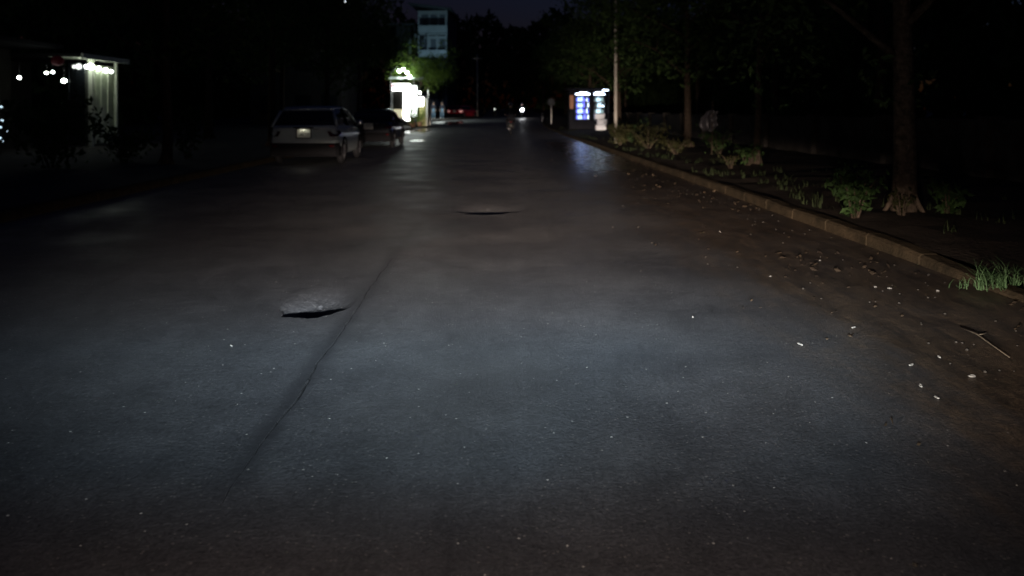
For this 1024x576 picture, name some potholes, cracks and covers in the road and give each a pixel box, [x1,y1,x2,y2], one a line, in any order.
pothole [449,203,525,215]
crack [222,260,391,503]
pothole [279,286,359,319]
